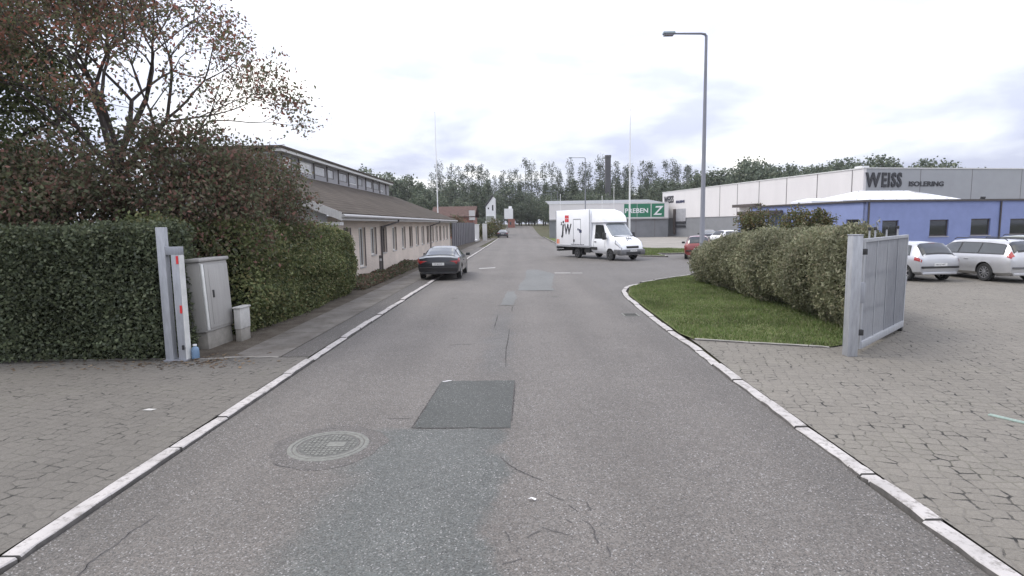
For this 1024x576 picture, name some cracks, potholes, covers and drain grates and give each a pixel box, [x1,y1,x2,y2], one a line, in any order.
crack [500,457,611,565]
manhole cover [287,431,369,461]
crack [77,515,157,576]
